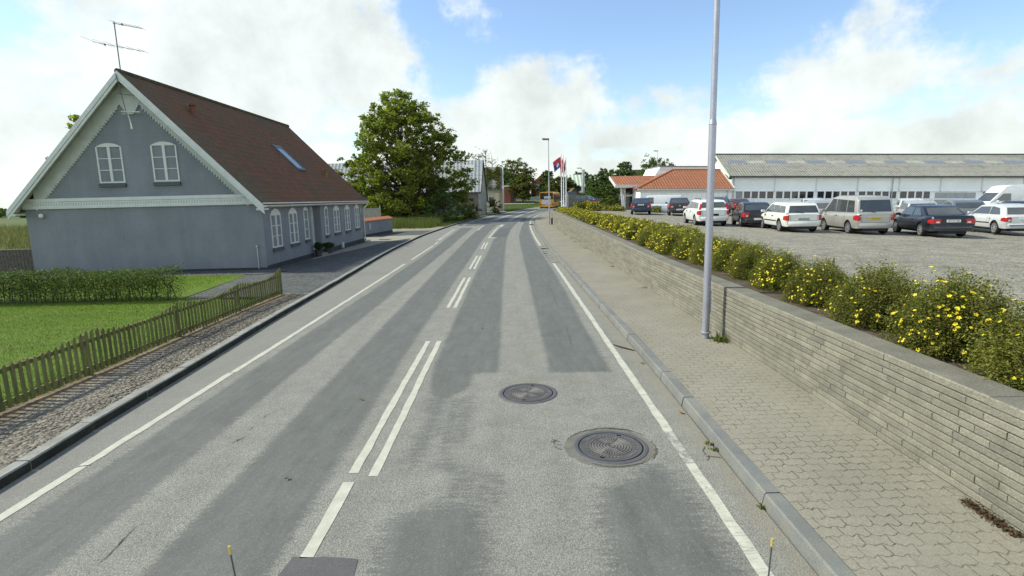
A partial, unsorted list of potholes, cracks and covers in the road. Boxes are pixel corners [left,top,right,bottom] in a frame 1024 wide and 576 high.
manhole cover [573,431,649,464]
manhole cover [499,383,557,404]
